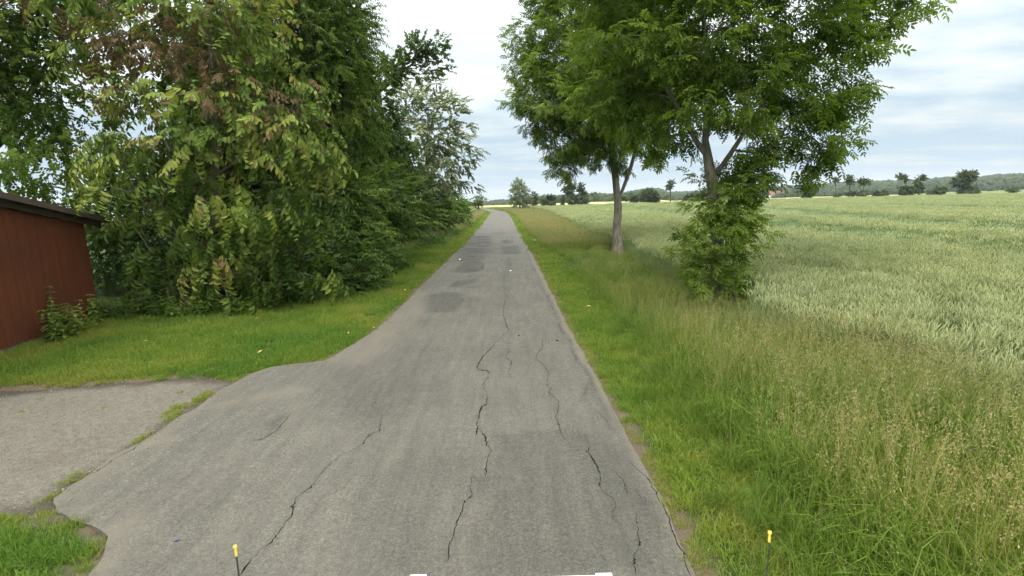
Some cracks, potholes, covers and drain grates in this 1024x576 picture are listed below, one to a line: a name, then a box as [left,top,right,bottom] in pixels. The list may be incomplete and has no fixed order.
crack [448,285,512,559]
crack [584,435,691,576]
crack [240,397,382,575]
